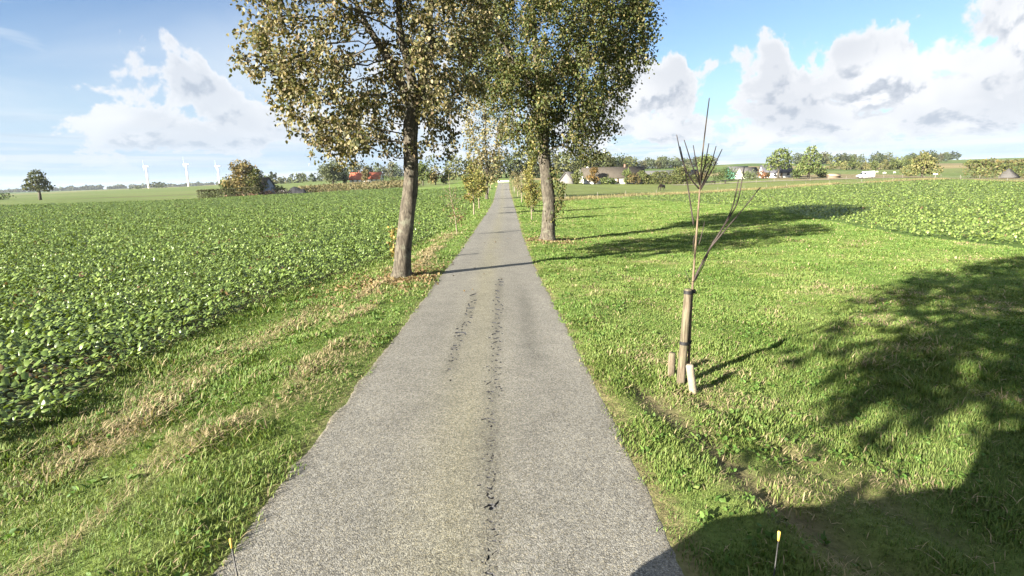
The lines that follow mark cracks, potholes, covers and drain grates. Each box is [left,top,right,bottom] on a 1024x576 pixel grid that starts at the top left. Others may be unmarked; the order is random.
crack [471,279,504,576]
